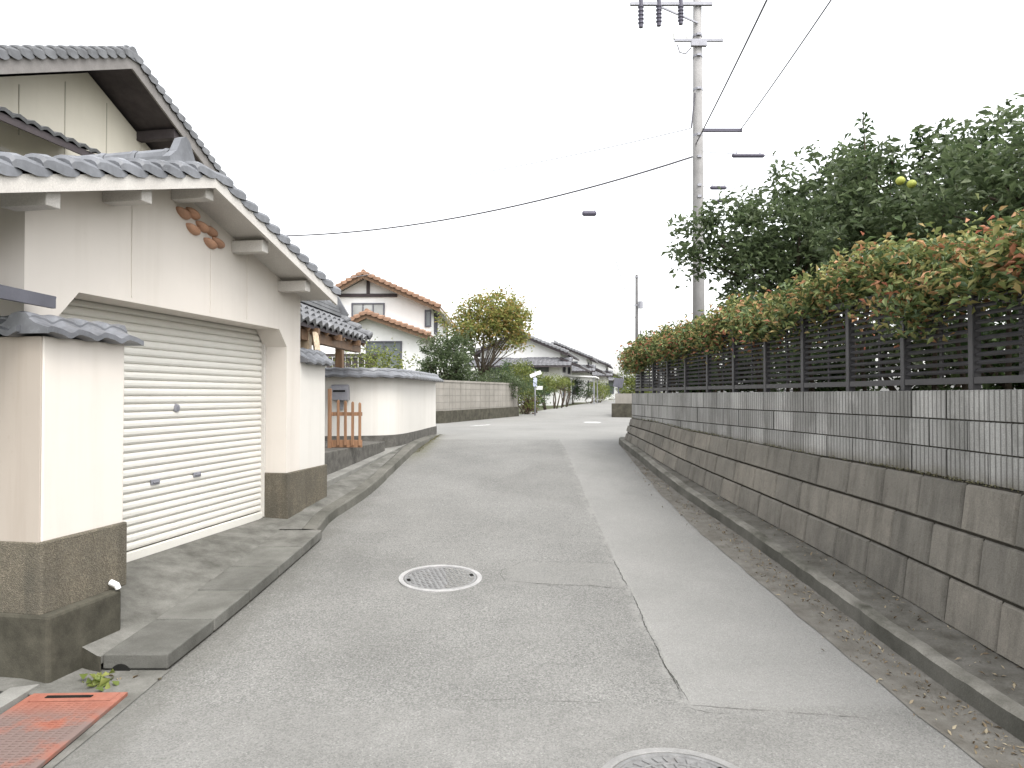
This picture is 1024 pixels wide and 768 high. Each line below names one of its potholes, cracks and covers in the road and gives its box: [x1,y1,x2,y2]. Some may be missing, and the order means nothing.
manhole cover [398,565,482,592]
manhole cover [602,748,739,768]
crack [500,560,688,700]
drain grate [0,692,128,768]
